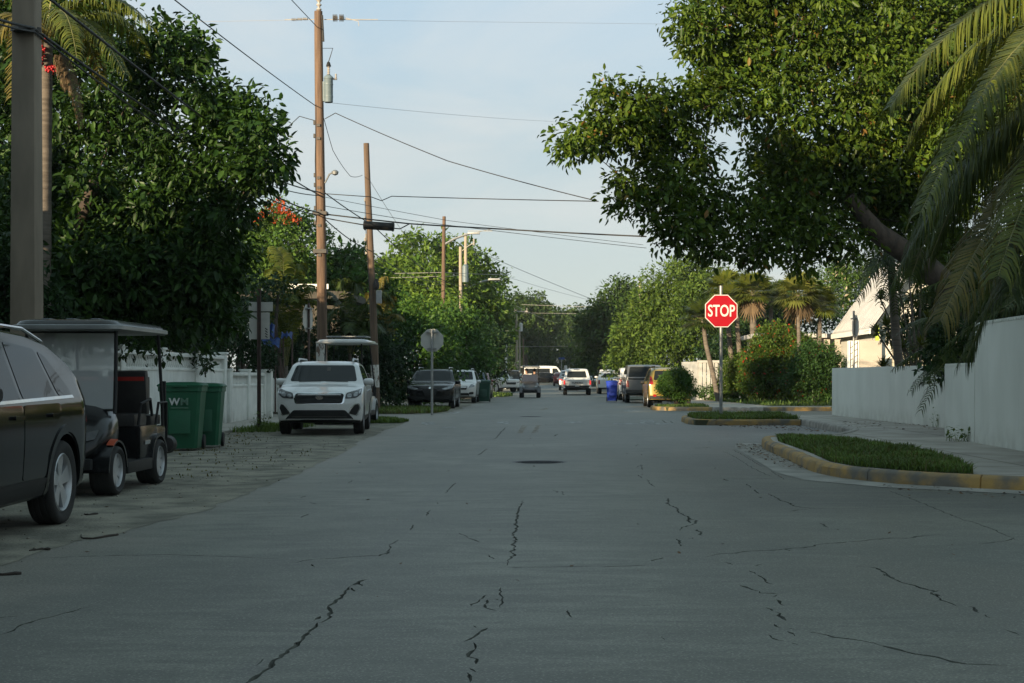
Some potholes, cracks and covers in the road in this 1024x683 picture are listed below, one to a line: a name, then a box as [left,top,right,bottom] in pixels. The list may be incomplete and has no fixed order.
crack [459,455,990,665]
crack [0,607,87,634]
crack [463,588,504,682]
crack [246,580,364,683]
crack [295,483,456,567]
